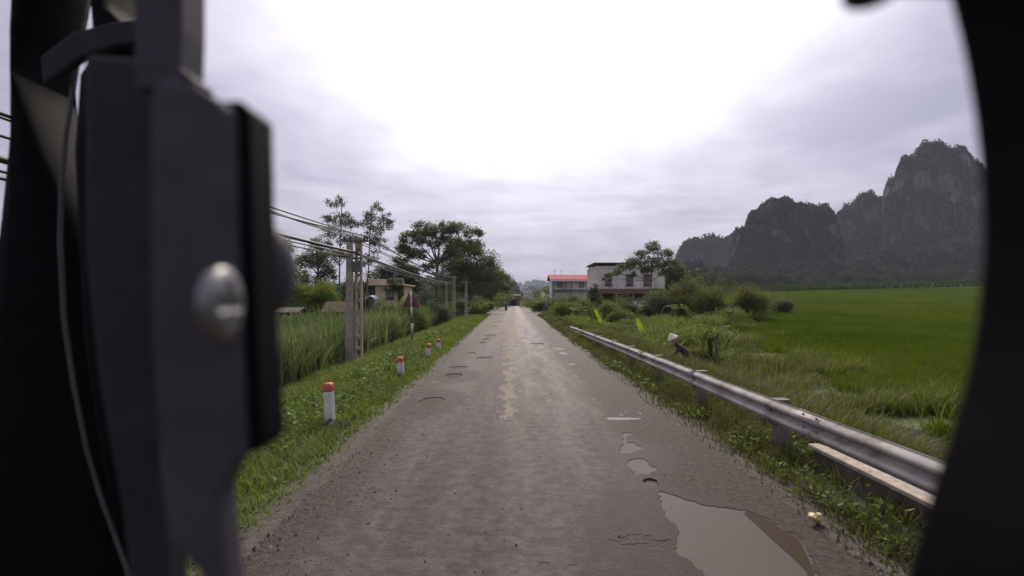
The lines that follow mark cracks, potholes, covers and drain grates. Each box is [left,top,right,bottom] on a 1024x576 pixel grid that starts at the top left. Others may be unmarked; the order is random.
pothole [418,397,445,407]
pothole [658,490,820,576]
pothole [643,478,659,487]
pothole [619,432,643,454]
pothole [627,458,658,474]
crack [609,534,672,545]
